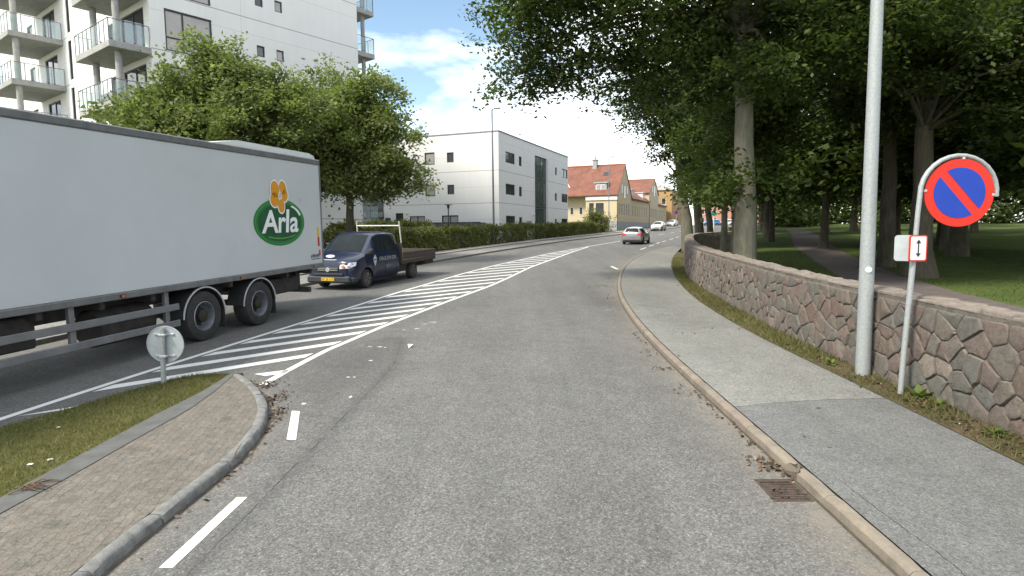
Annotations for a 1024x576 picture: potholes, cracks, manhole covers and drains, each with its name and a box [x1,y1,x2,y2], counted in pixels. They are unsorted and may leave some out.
drain grate [754,479,815,502]
